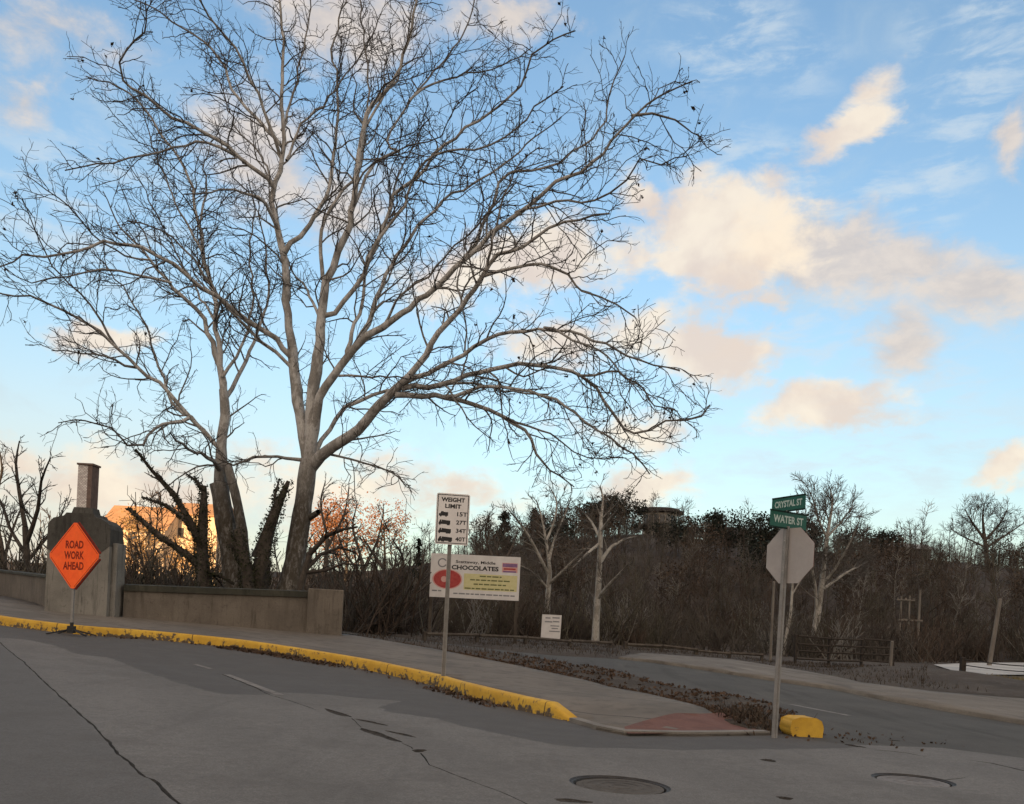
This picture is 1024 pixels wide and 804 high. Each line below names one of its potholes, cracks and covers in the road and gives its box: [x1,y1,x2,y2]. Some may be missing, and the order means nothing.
manhole cover [871,773,957,787]
manhole cover [569,775,671,795]
crack [0,642,181,804]
